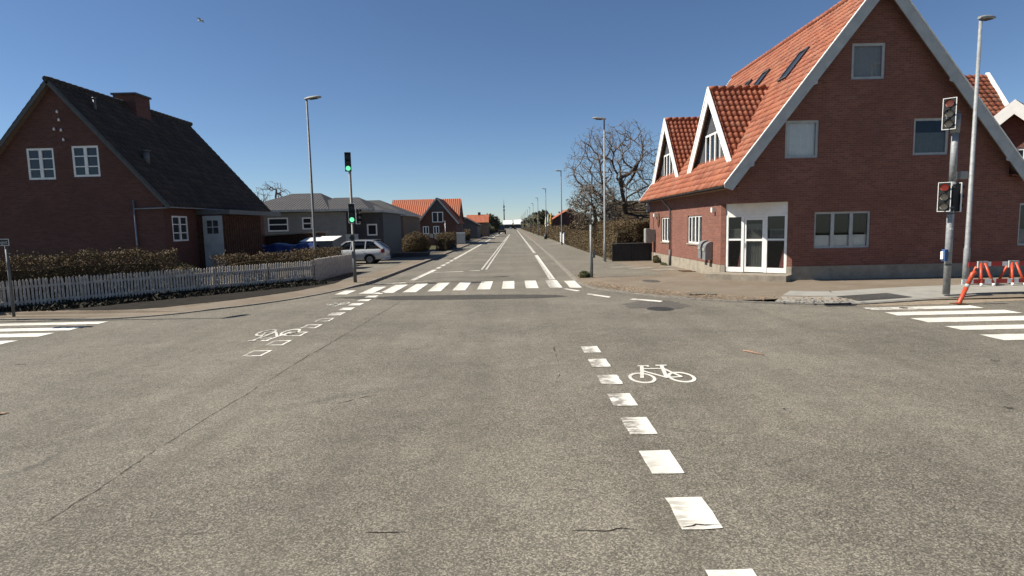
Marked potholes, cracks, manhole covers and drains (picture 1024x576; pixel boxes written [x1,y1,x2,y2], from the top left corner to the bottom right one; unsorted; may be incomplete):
crack [135,524,712,535]
crack [36,303,398,527]
